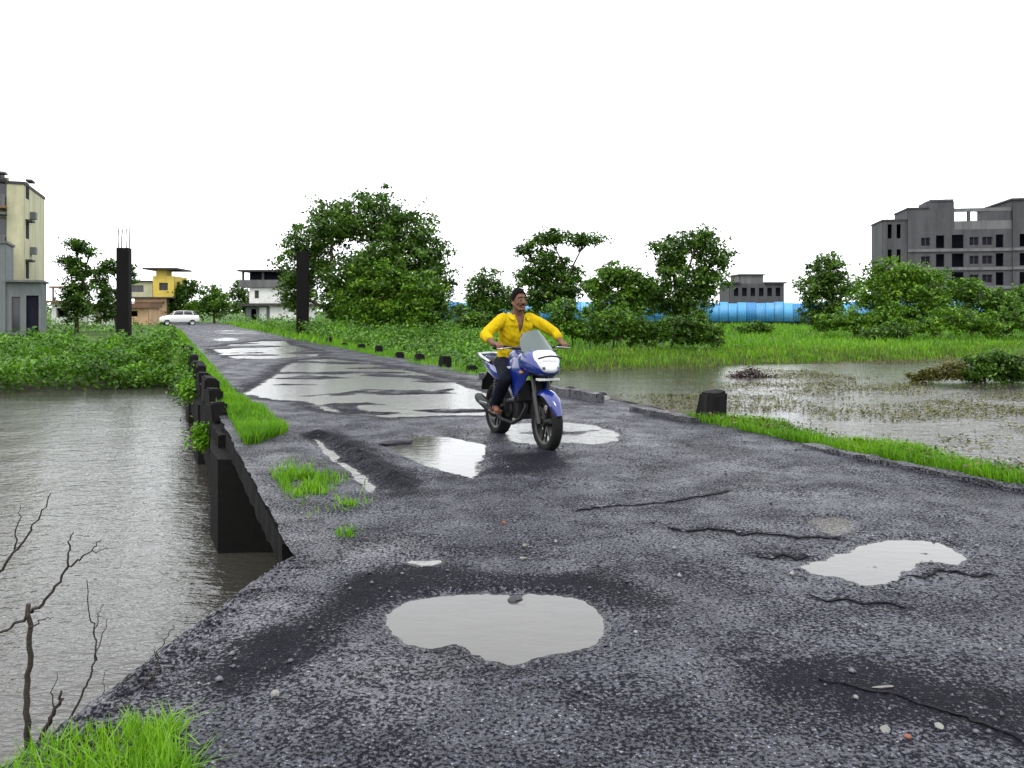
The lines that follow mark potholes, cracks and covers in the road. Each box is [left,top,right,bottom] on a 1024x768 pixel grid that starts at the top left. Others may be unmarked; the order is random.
pothole [785,534,980,590]
crack [668,527,840,560]
pothole [369,585,623,670]
pothole [210,341,324,359]
crack [809,569,992,608]
pothole [378,433,496,479]
pothole [500,420,626,445]
crack [818,679,1024,745]
pothole [240,359,487,418]
crack [576,490,730,511]
